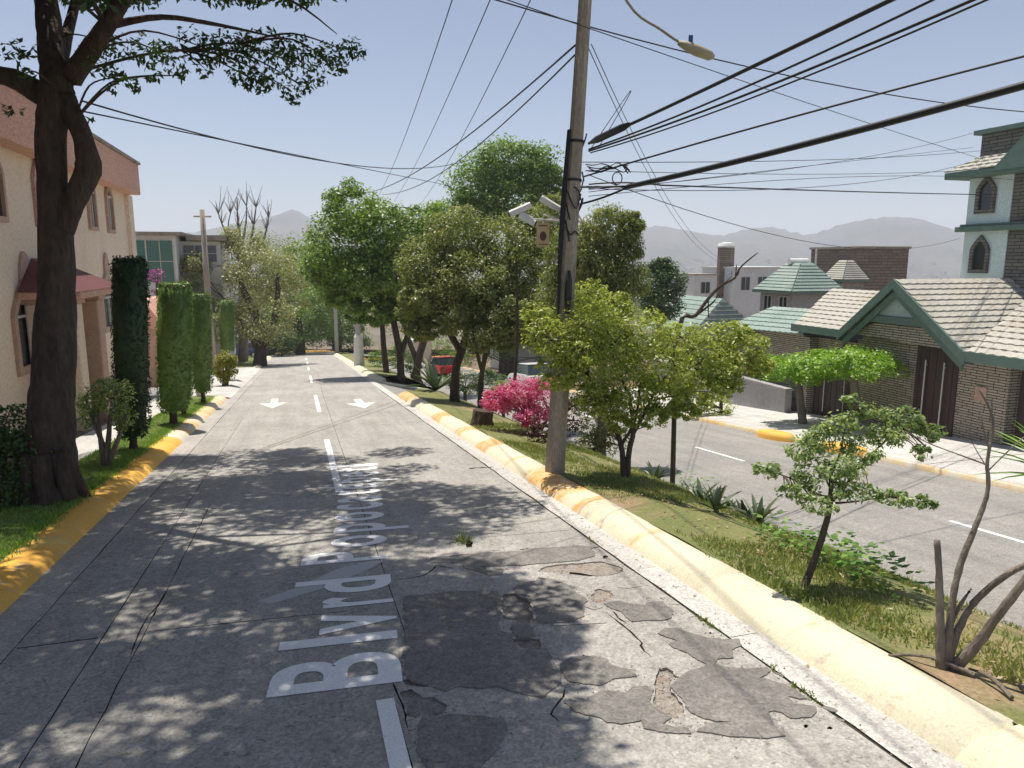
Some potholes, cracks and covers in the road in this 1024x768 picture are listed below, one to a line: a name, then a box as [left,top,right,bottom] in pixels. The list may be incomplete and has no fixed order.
crack [550,689,565,721]
crack [586,607,651,657]
pothole [653,667,685,721]
crack [130,591,167,658]
